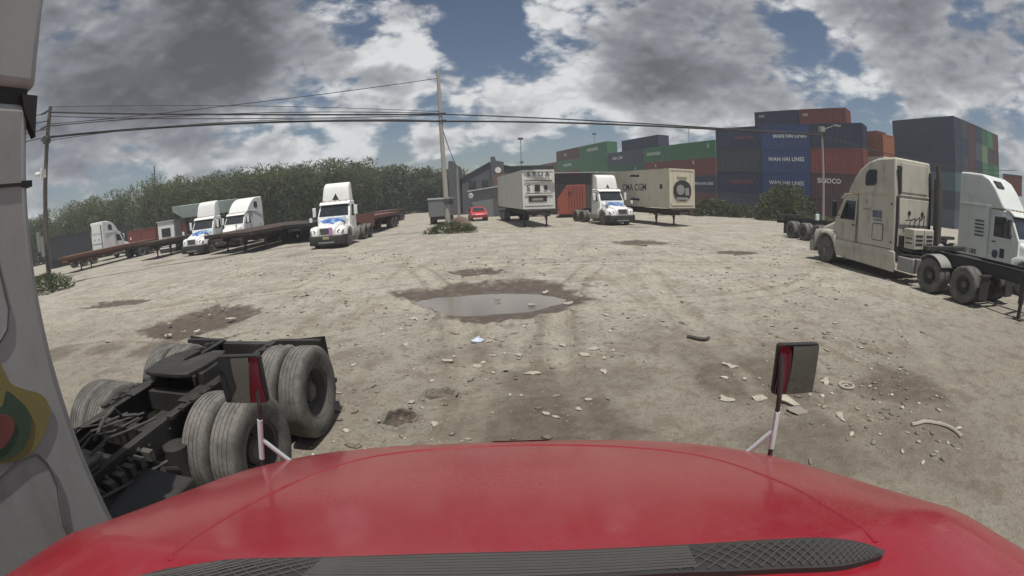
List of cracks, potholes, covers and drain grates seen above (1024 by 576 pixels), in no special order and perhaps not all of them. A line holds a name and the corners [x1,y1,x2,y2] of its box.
pothole [379,407,419,430]
pothole [385,276,607,330]
pothole [420,387,459,402]
